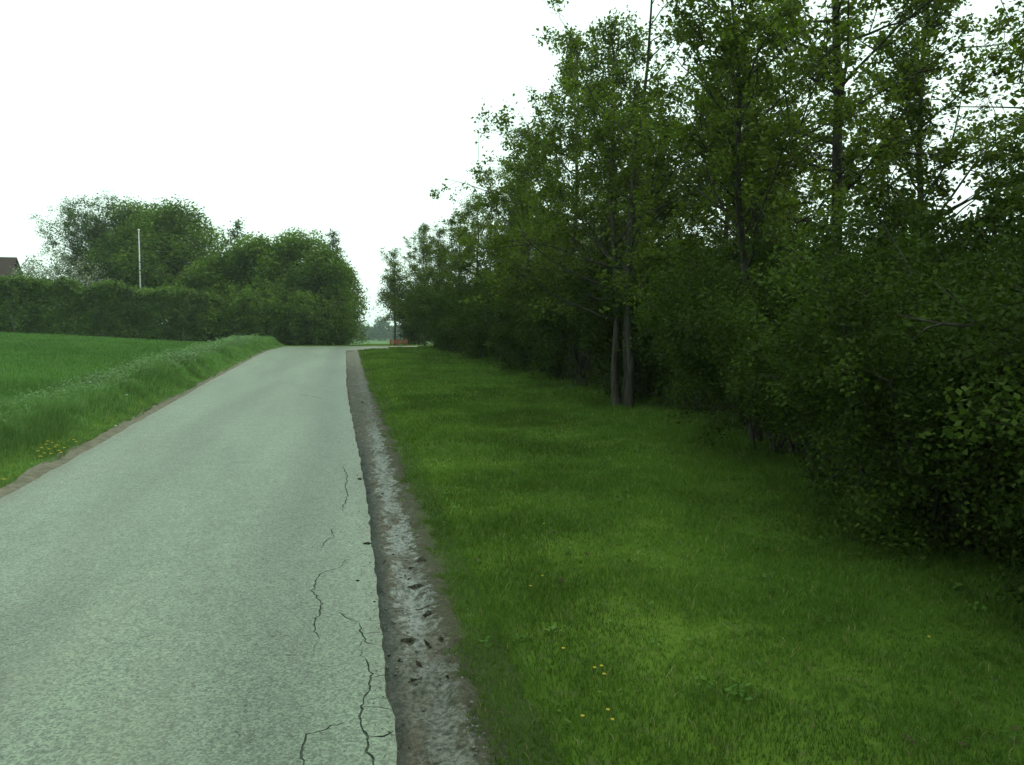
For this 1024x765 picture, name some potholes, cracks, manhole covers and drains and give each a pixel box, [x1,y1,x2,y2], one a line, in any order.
crack [300,464,394,765]
